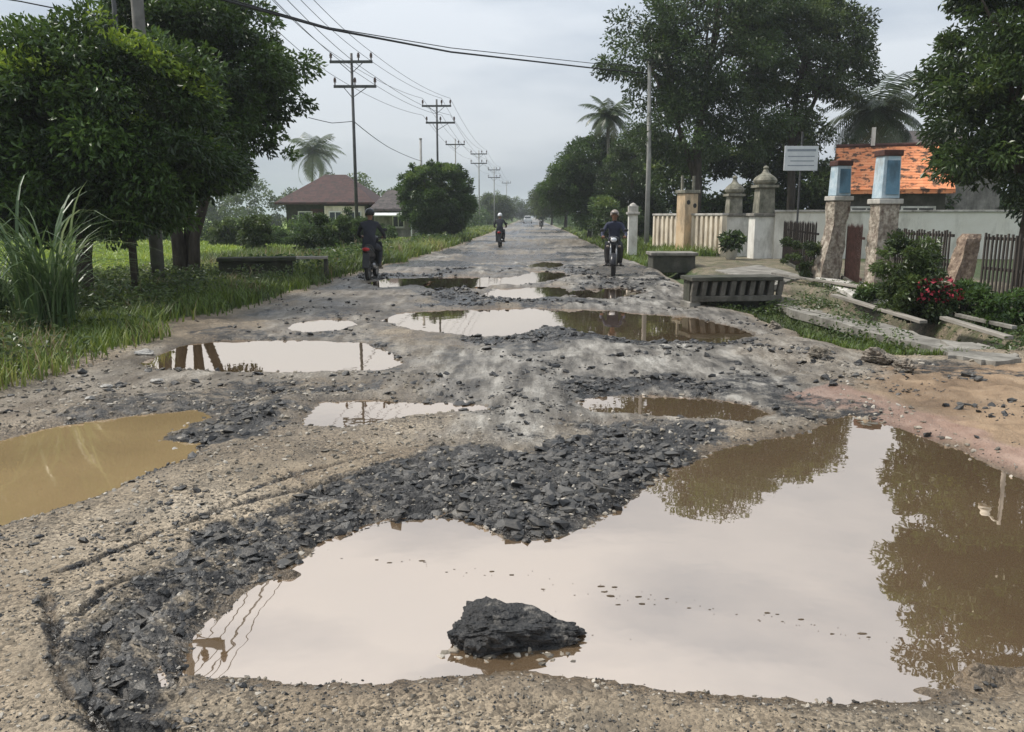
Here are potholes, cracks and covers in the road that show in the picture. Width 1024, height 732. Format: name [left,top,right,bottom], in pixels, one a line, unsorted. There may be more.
pothole [0,409,212,526]
pothole [380,306,755,344]
pothole [157,415,1024,708]
pothole [138,339,404,373]
pothole [474,270,566,287]
pothole [422,274,485,289]
pothole [299,398,490,428]
pothole [579,287,645,299]
pothole [577,394,775,422]
pothole [479,286,584,299]
pothole [368,278,435,288]
pothole [286,317,357,332]
